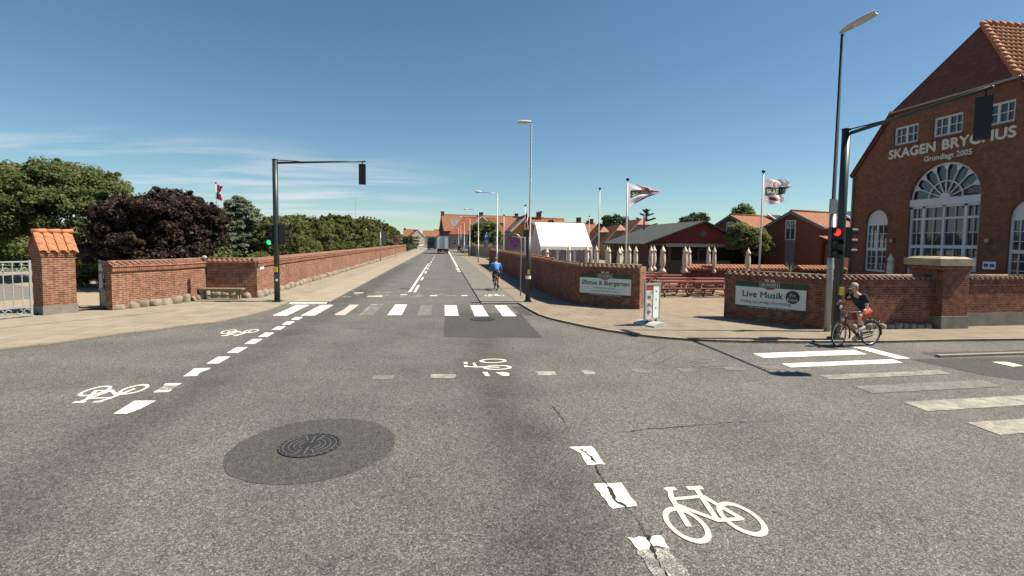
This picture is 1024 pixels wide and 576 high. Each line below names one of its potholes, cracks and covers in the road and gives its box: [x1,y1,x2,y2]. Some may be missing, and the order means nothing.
manhole cover [278,433,341,458]
